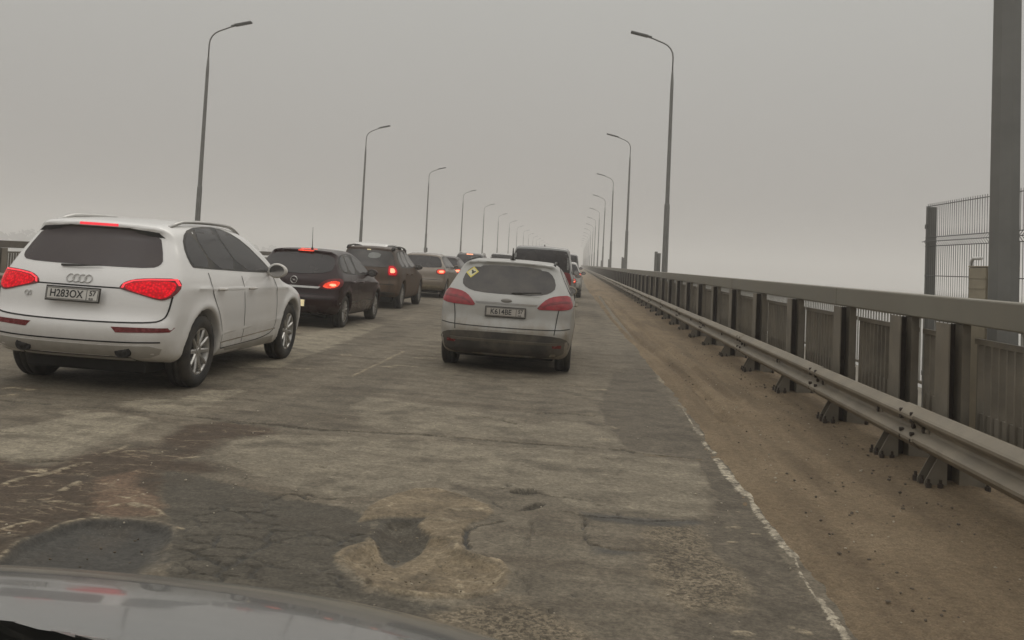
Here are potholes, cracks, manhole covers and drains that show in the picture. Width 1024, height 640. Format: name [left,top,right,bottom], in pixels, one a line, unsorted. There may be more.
pothole [335,518,511,594]
crack [175,490,374,590]
